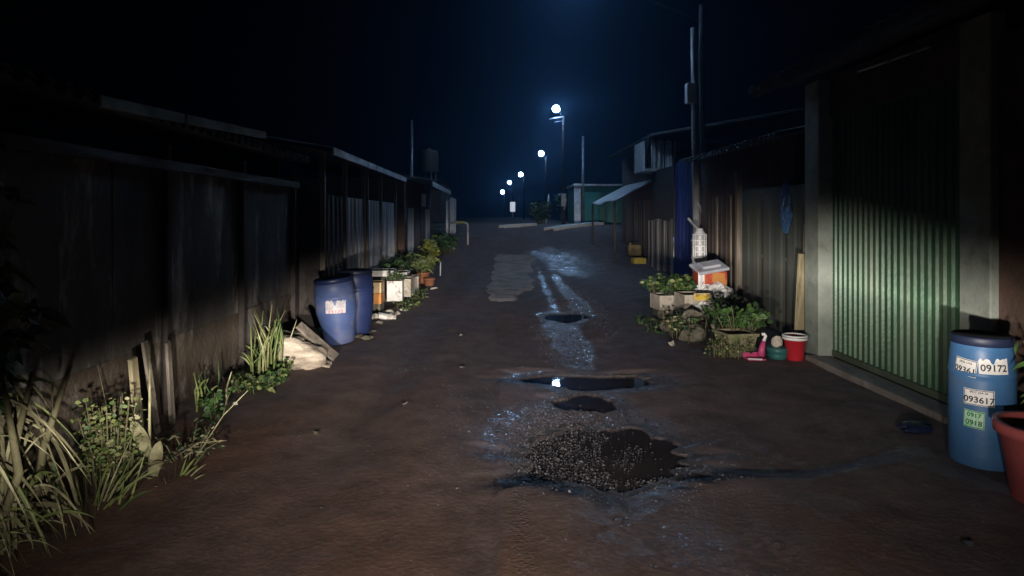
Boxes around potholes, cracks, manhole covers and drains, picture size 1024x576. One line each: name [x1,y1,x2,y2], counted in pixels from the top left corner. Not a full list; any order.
pothole [510,422,704,498]
pothole [539,313,593,324]
pothole [510,373,667,394]
pothole [544,392,621,415]
